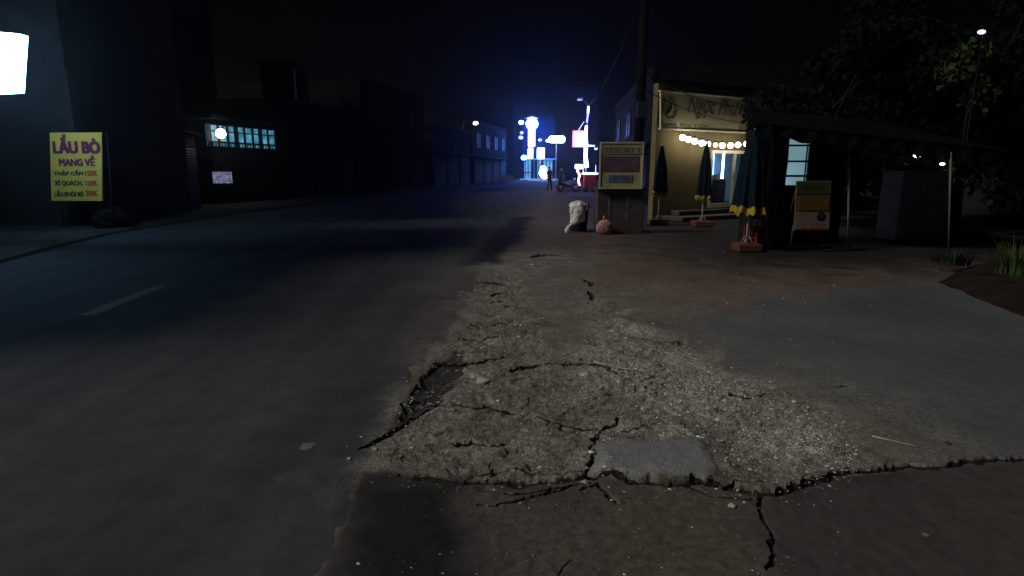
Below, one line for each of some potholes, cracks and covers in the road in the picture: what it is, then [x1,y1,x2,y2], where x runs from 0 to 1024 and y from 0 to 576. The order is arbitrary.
crack [360,404,1024,576]
pothole [391,366,465,437]
crack [437,282,618,374]
